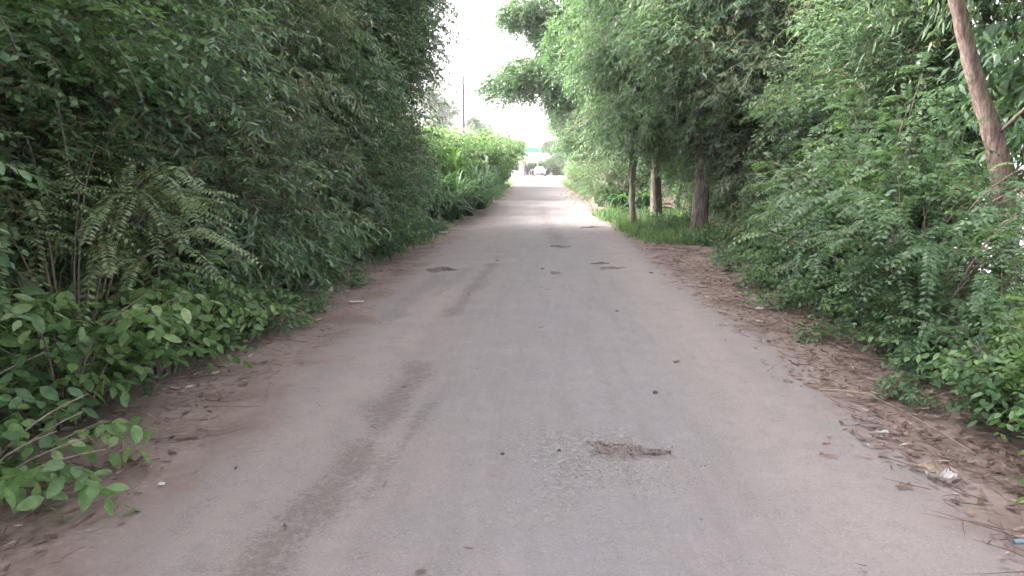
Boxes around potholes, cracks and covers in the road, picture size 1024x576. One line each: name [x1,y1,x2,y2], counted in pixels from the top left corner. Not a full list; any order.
pothole [585,441,677,461]
